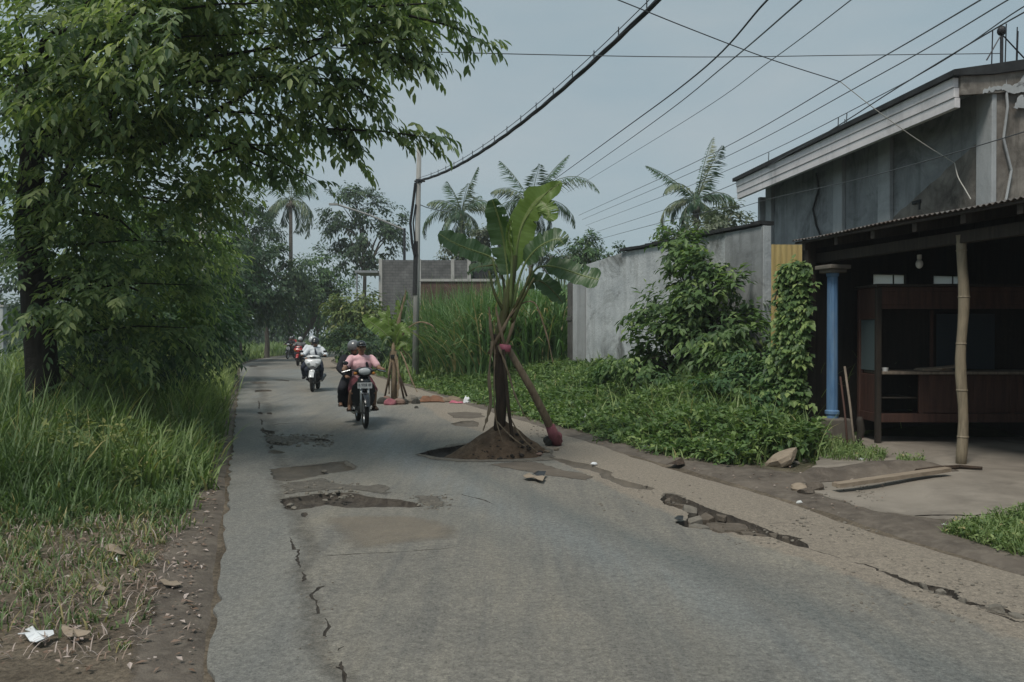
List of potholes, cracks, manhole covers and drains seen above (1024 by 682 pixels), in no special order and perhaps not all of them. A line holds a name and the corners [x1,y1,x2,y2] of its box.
pothole [280,492,425,510]
crack [811,549,1024,622]
pothole [660,494,809,548]
crack [290,538,347,682]
pothole [419,445,464,458]
